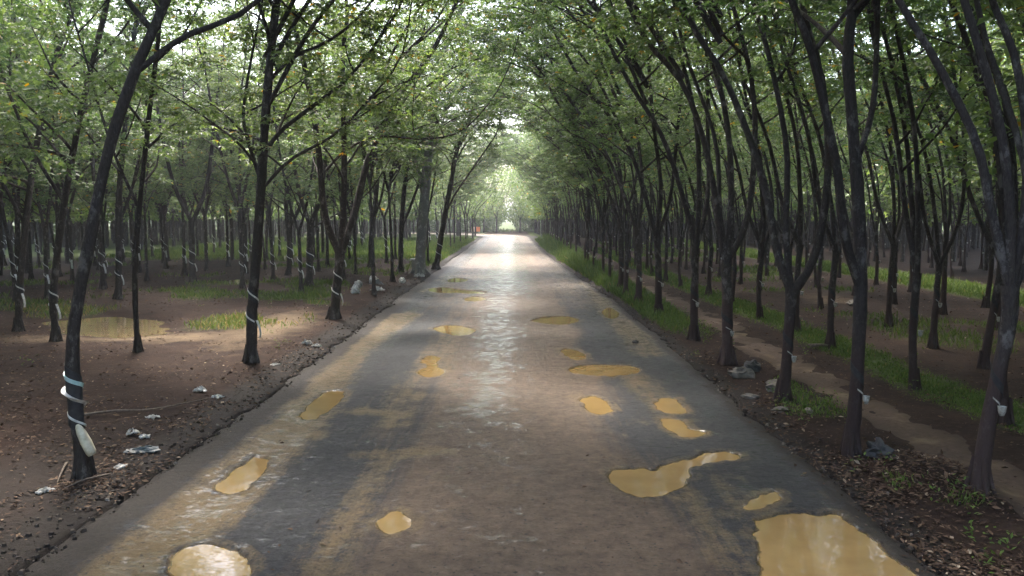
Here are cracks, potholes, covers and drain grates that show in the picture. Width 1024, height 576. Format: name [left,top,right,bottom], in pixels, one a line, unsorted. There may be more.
pothole [408,354,454,379]
pothole [561,363,648,378]
pothole [650,416,717,440]
pothole [289,388,353,422]
pothole [570,394,622,417]
pothole [596,307,628,319]
pothole [554,347,594,361]
pothole [524,315,584,325]
